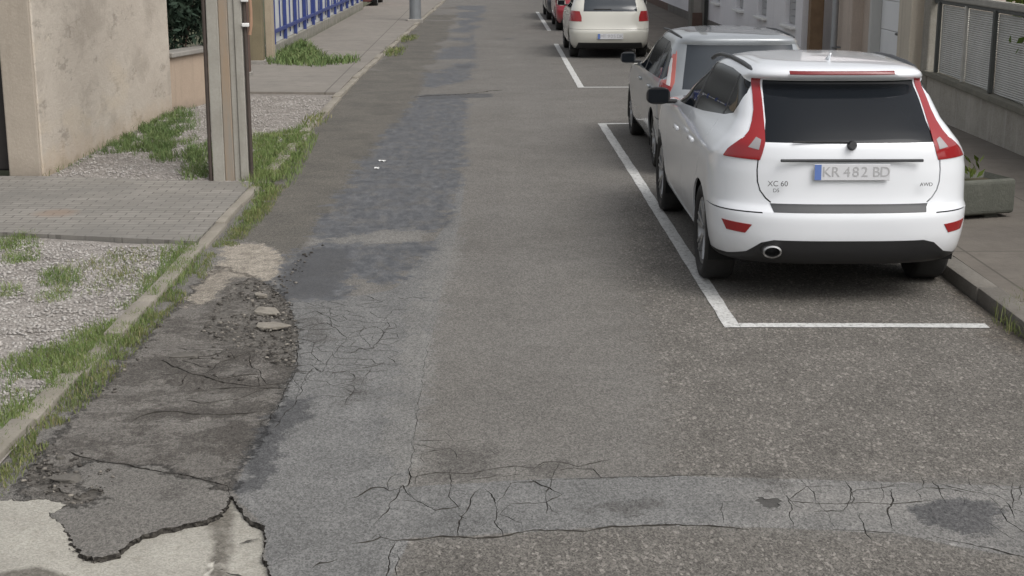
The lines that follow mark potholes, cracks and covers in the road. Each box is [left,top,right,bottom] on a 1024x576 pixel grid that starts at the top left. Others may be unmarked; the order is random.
pothole [755,497,782,509]
crack [133,286,404,429]
crack [353,432,749,576]
crack [720,477,1024,557]
pothole [200,278,302,367]
